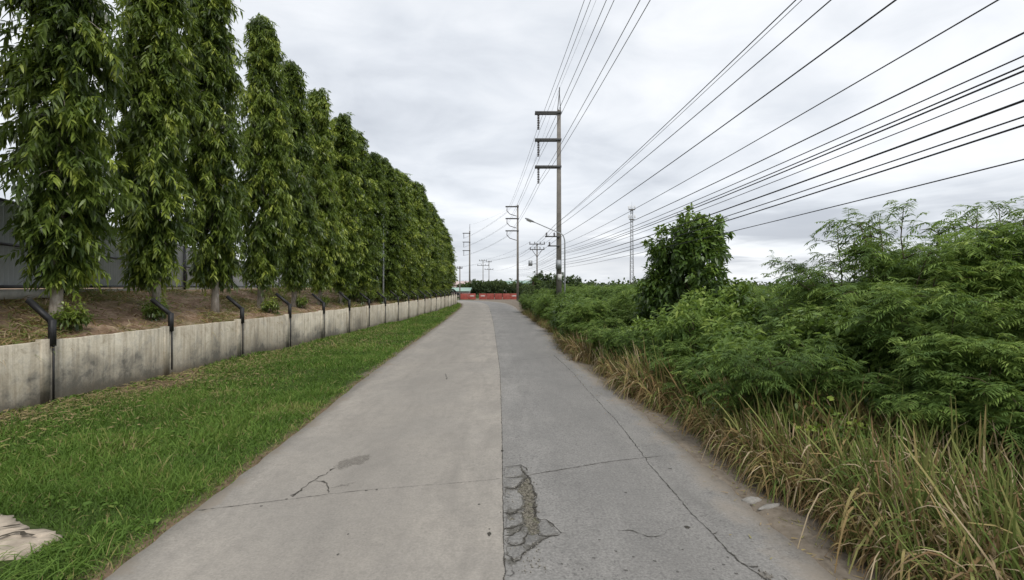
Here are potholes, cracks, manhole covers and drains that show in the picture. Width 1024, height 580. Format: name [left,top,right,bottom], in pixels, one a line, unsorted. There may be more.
pothole [517,478,540,535]
